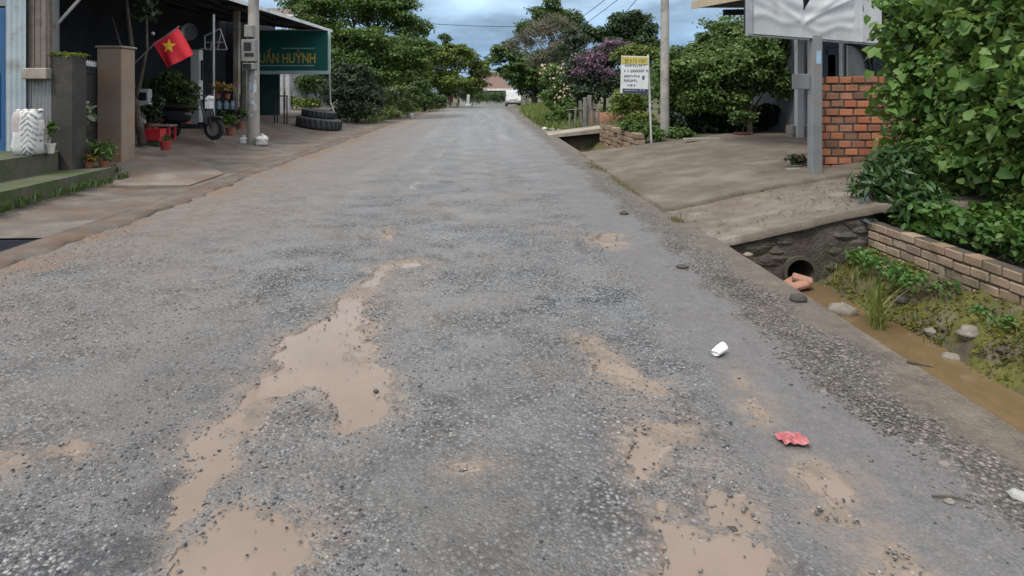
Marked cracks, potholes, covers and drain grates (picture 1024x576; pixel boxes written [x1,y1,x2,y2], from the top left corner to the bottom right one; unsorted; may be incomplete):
pothole [619,423,700,480]
pothole [45,439,90,457]
pothole [577,336,670,394]
pothole [735,378,775,422]
pothole [808,499,866,528]
pothole [167,501,312,576]
pothole [164,260,428,532]
pothole [649,488,783,576]
pothole [859,542,932,576]
pothole [785,460,859,507]
pothole [589,233,628,249]
pothole [450,462,480,476]
